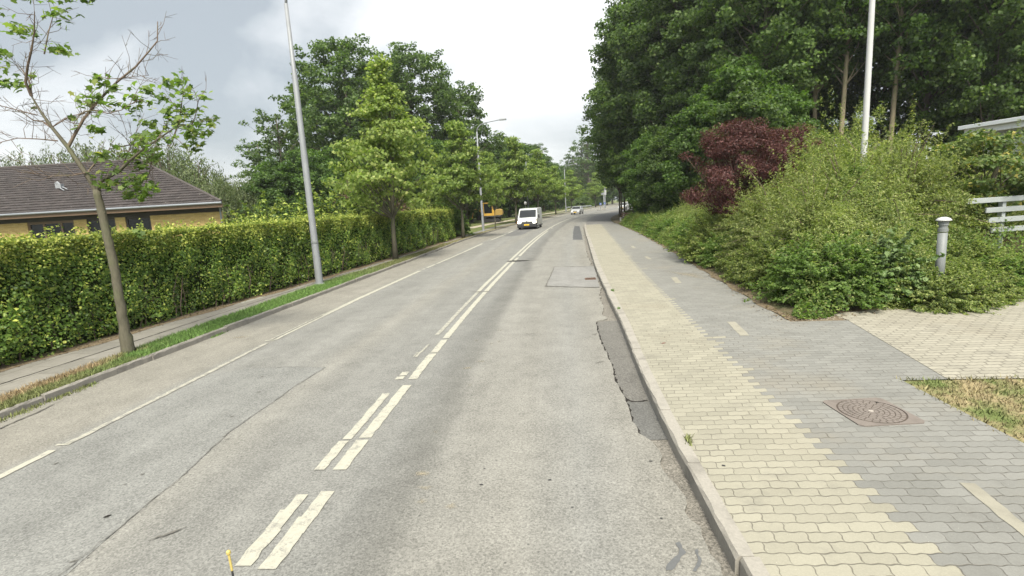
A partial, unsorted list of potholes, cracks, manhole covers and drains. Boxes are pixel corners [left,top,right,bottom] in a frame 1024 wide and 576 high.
pothole [597,321,668,440]
manhole cover [823,397,925,427]
